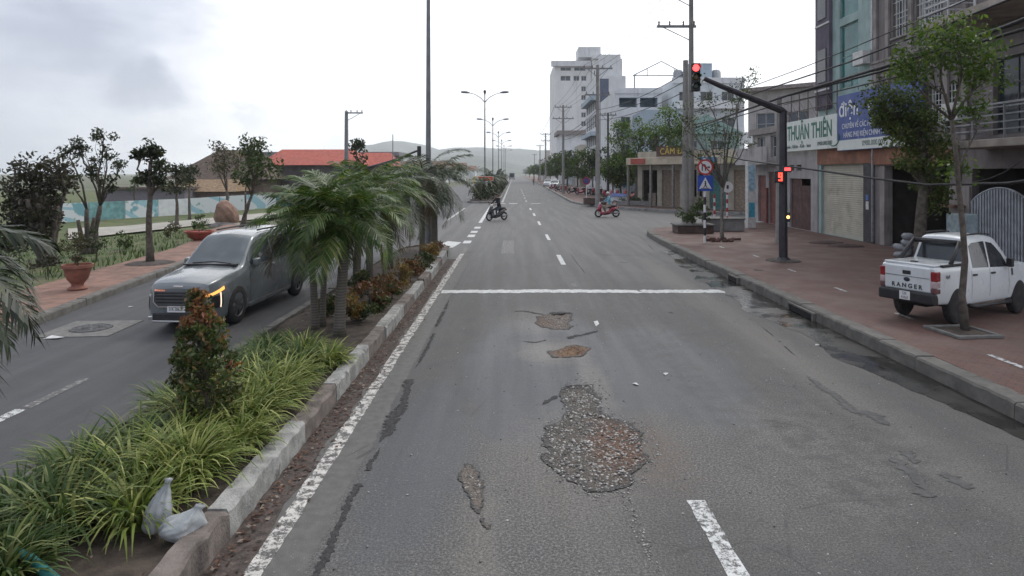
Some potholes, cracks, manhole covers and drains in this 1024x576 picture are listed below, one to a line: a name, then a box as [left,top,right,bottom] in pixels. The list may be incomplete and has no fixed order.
pothole [535,311,573,330]
pothole [538,378,663,501]
pothole [457,463,491,529]
manhole cover [33,320,144,338]
crack [525,311,598,339]
drain grate [787,301,816,322]
